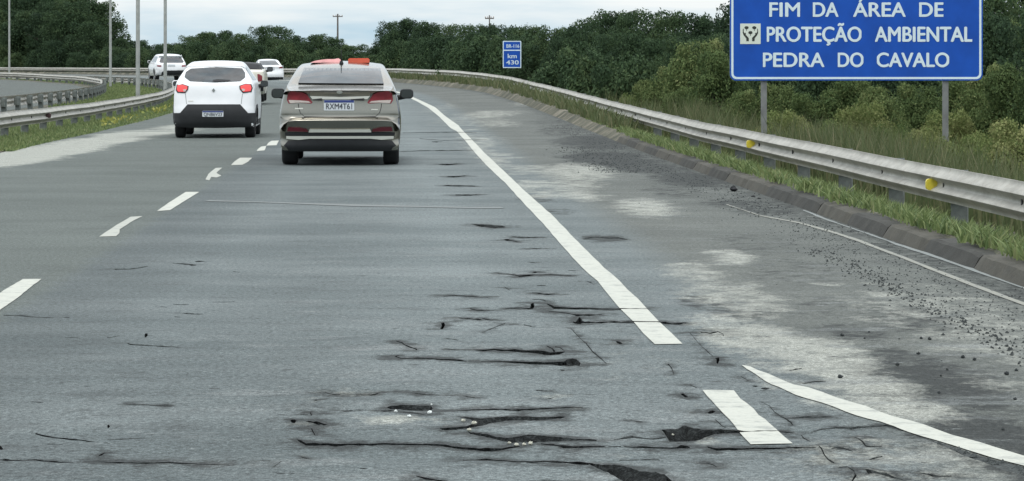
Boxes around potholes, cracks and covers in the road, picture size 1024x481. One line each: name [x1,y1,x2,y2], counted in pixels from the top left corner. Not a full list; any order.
crack [395,341,567,370]
pothole [586,463,671,481]
crack [35,433,217,465]
pothole [387,405,433,415]
crack [452,272,683,325]
pothole [661,426,741,448]
crack [298,393,690,469]
